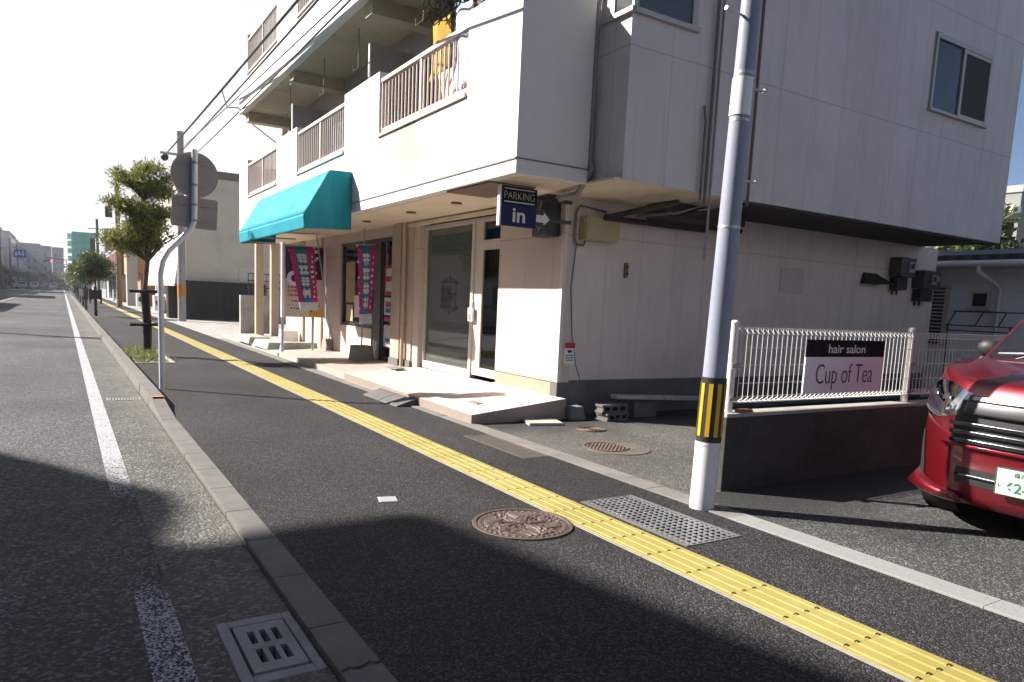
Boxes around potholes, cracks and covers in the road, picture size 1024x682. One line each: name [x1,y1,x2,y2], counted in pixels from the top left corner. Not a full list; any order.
drain grate [581,495,741,547]
manhole cover [472,508,573,541]
